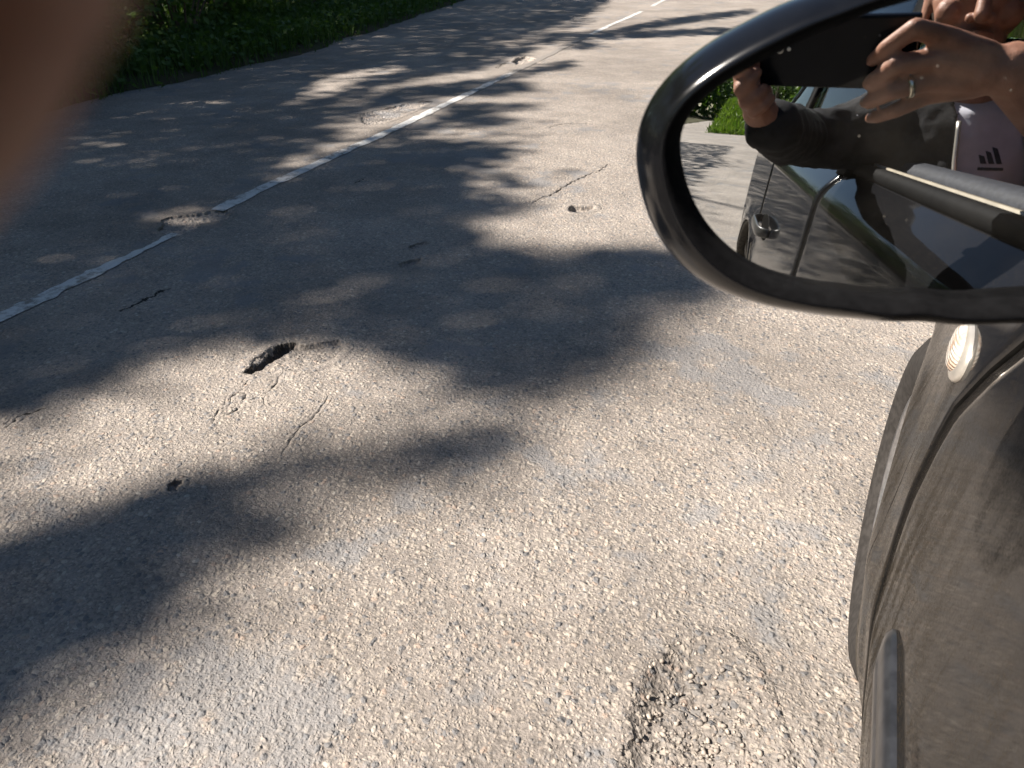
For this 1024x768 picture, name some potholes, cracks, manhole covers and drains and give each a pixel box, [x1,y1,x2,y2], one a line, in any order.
pothole [235,336,354,381]
crack [208,377,333,454]
crack [1,406,49,429]
pothole [161,475,190,495]
pothole [604,624,797,768]
